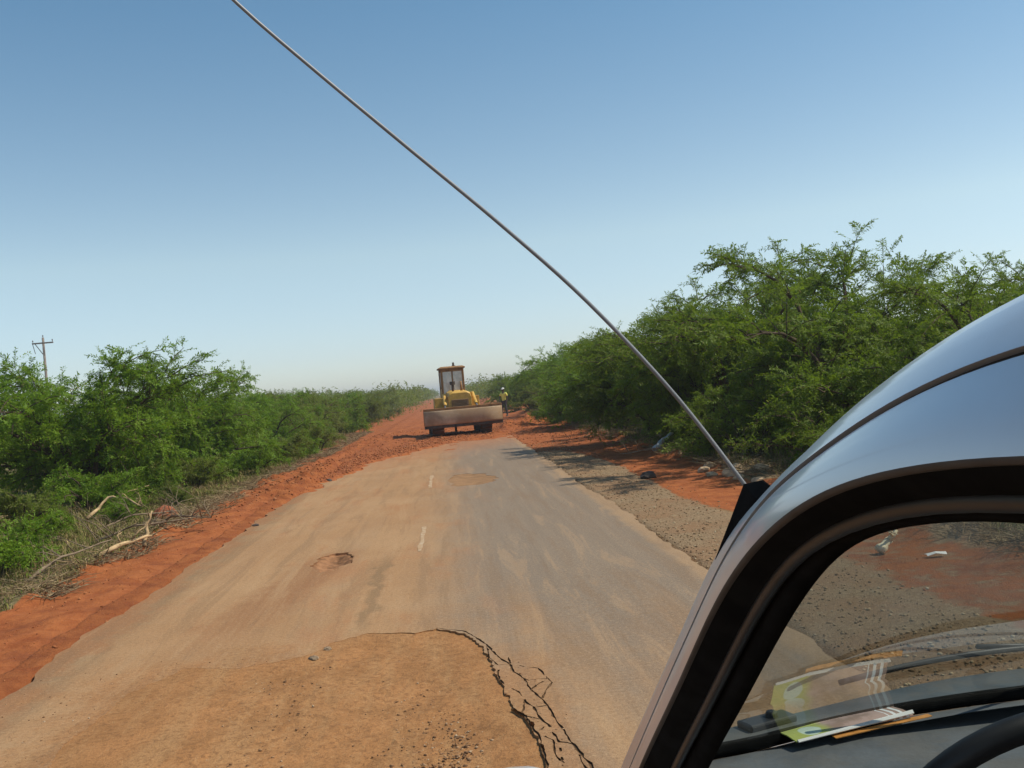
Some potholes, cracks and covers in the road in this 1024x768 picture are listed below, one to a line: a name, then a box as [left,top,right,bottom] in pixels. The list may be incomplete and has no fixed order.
crack [440,628,594,768]
pothole [310,552,354,573]
